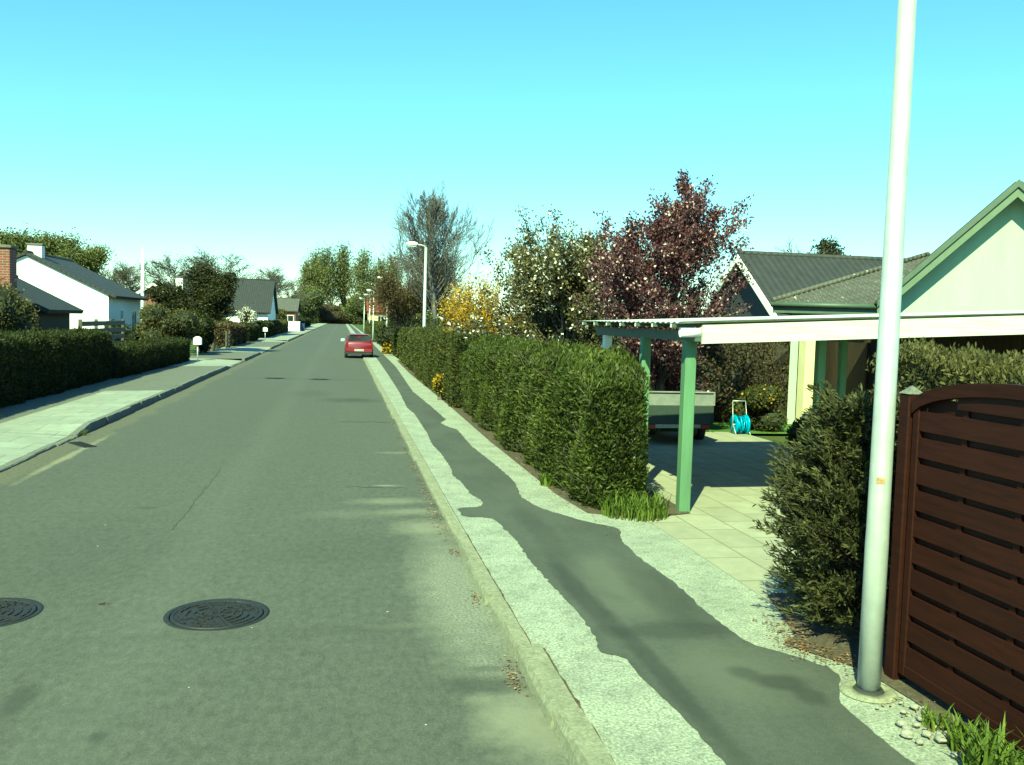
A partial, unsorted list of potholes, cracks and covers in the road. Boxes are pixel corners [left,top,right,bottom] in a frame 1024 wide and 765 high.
manhole cover [163,598,270,631]
manhole cover [0,598,44,627]
